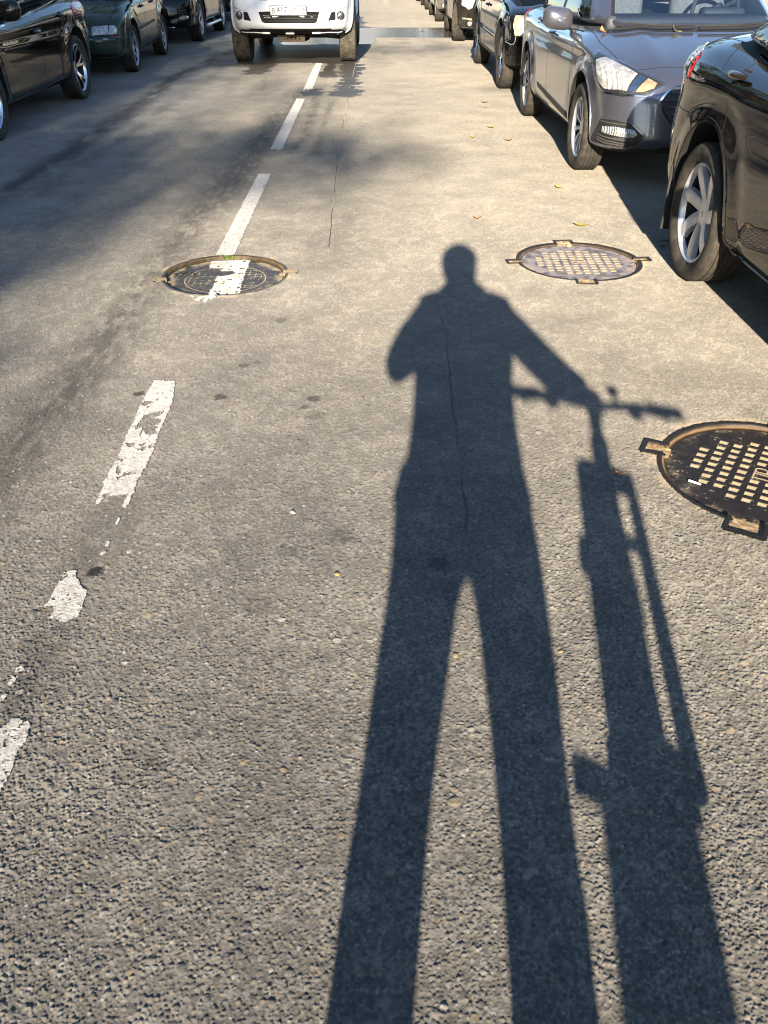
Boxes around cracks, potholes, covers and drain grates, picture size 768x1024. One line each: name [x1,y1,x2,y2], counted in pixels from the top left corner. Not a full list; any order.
manhole cover [505,240,652,285]
crack [442,321,468,534]
manhole cover [152,254,299,296]
manhole cover [639,421,768,541]
